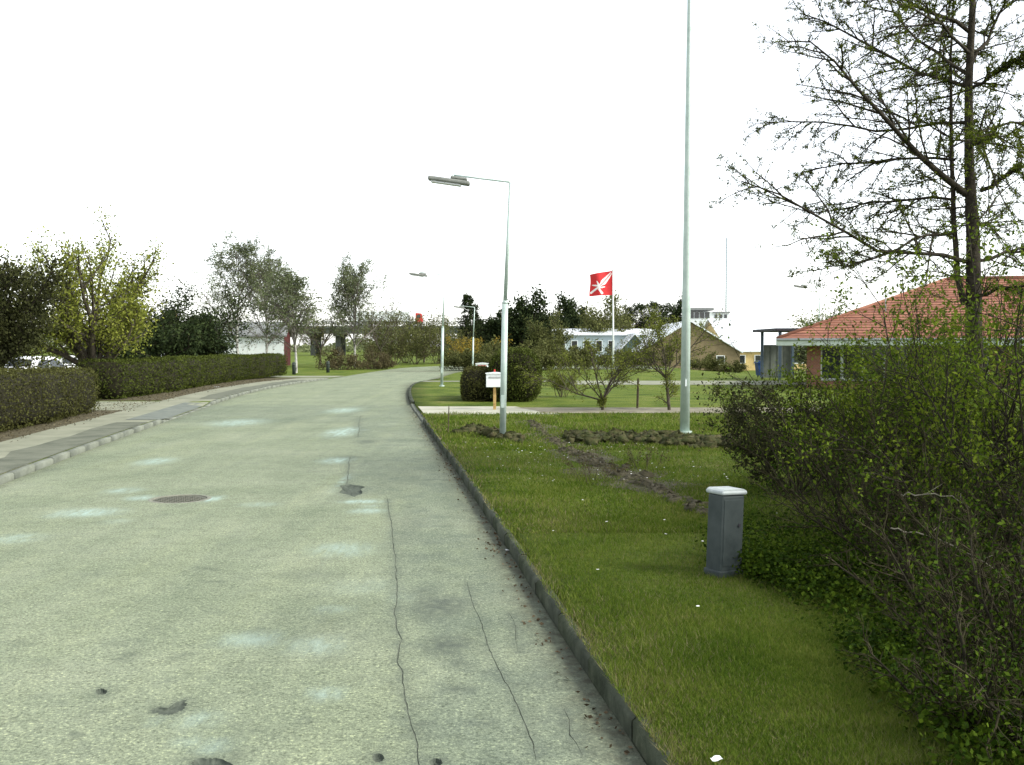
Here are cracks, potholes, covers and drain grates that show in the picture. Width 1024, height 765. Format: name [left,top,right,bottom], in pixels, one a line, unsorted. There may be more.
pothole [149,700,188,715]
manhole cover [148,494,212,504]
crack [387,500,425,765]
pothole [339,484,364,497]
